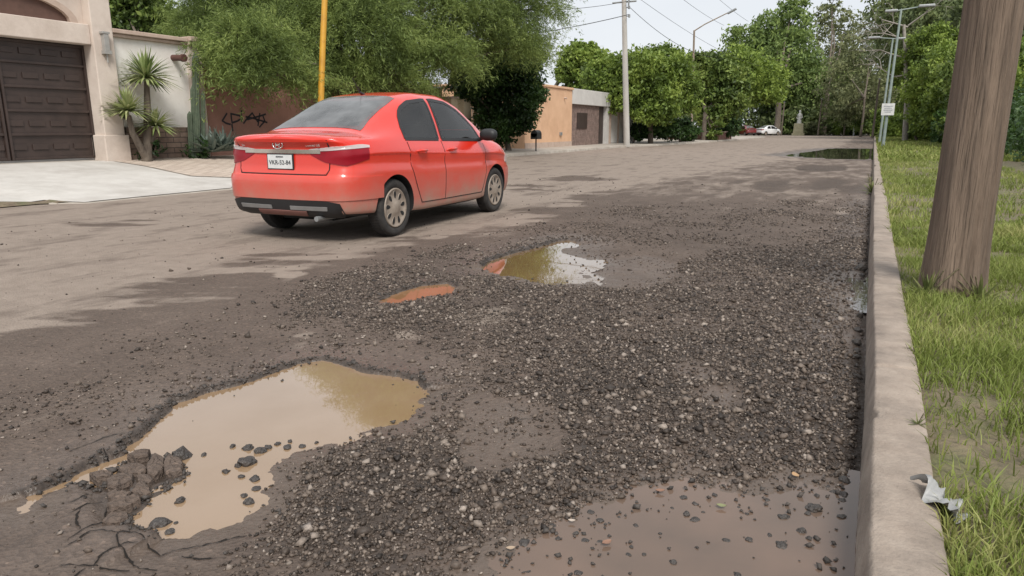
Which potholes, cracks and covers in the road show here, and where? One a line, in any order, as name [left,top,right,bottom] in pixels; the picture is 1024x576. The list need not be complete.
pothole [456,464,861,576]
crack [61,494,247,576]
pothole [471,237,608,286]
pothole [373,281,469,306]
pothole [0,354,445,561]
pothole [784,148,873,160]
